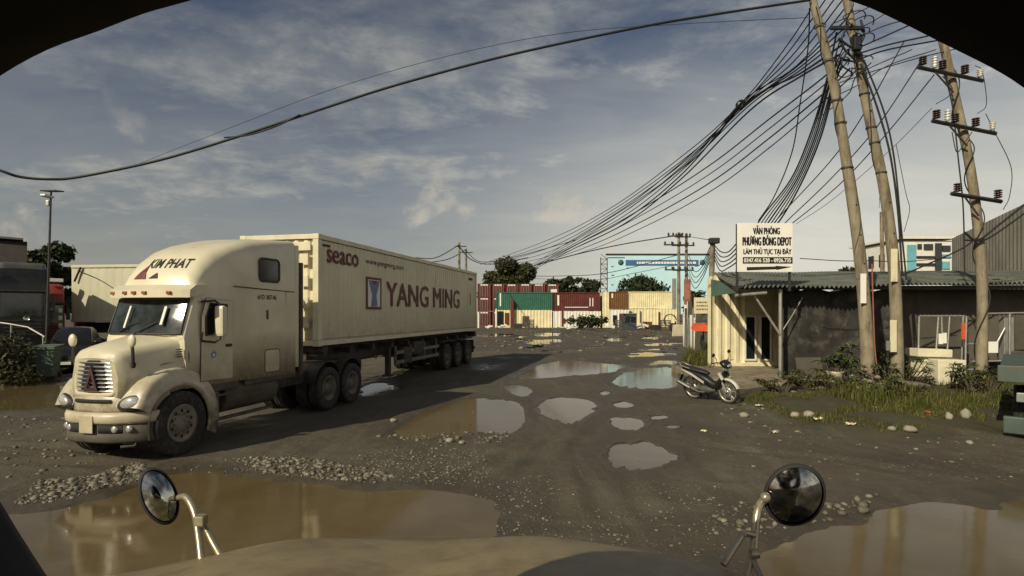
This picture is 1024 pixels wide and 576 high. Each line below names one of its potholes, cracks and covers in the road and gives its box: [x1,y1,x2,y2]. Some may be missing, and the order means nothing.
pothole [527,394,606,429]
pothole [502,358,642,382]
pothole [500,383,536,398]
pothole [610,400,638,409]
pothole [603,415,653,432]
pothole [366,394,541,449]
pothole [597,438,689,475]
pothole [602,364,685,392]
